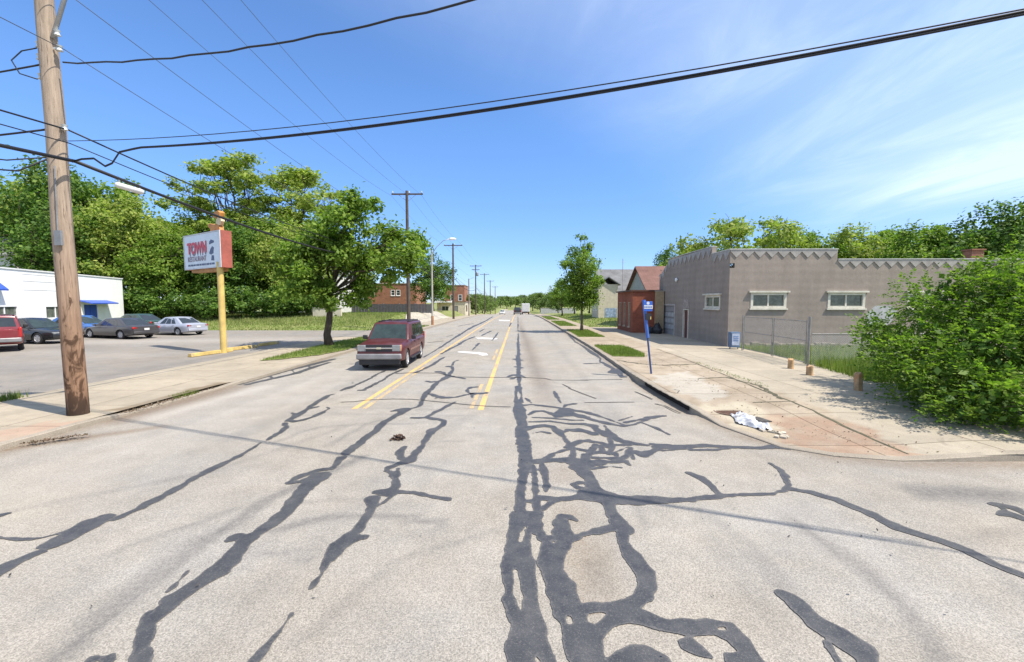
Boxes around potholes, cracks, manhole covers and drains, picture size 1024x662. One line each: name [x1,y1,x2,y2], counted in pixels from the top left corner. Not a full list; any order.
drain grate [645,382,690,410]
